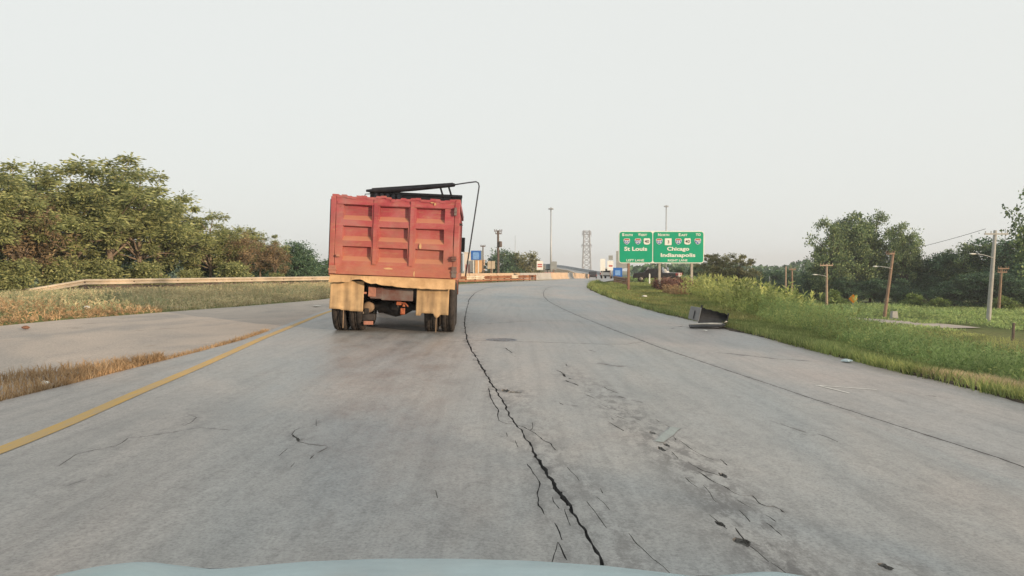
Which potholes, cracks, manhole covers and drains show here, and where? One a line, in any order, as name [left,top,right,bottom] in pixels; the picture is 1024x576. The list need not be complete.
crack [279,422,324,467]
crack [464,289,669,566]
crack [672,437,786,573]
